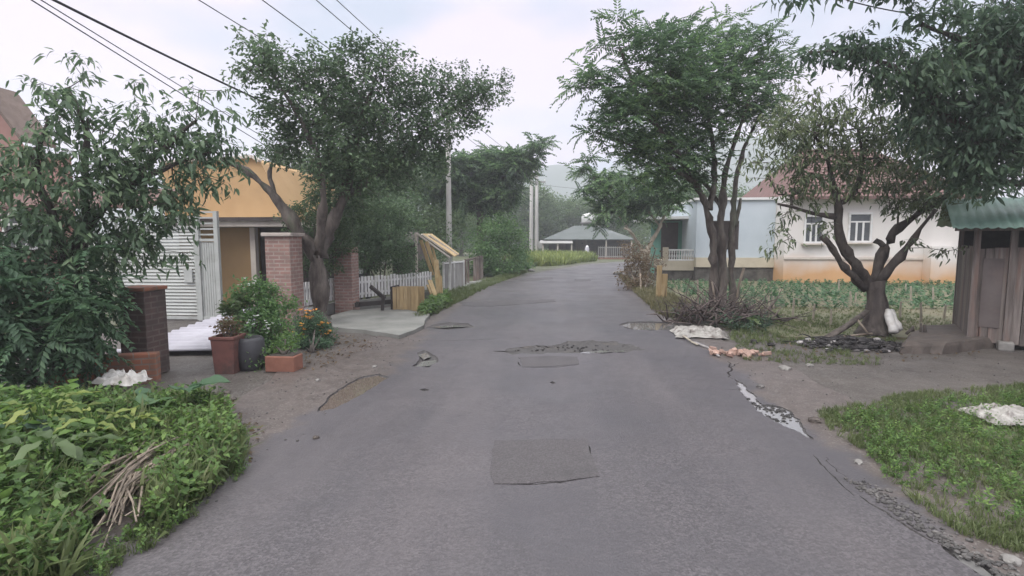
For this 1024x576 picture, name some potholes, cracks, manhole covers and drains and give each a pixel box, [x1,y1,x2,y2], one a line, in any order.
pothole [426,322,473,330]
pothole [494,340,644,355]
crack [813,454,942,546]
pothole [317,374,389,411]
pothole [620,321,680,330]
pothole [735,380,814,440]
pothole [413,350,439,367]
